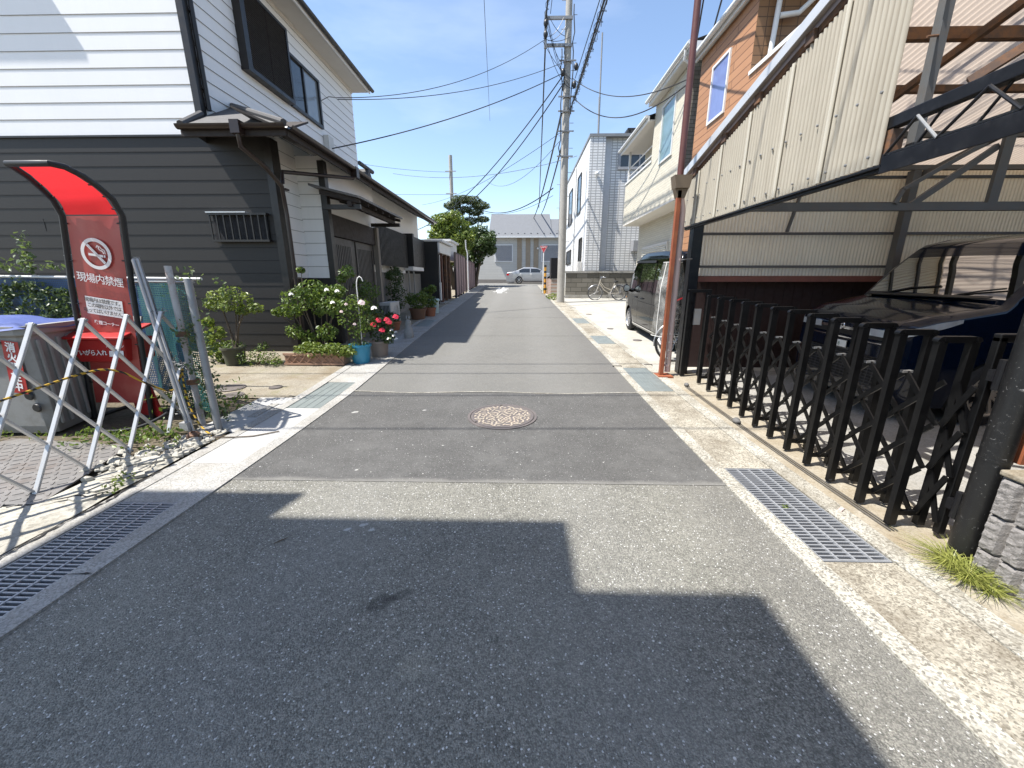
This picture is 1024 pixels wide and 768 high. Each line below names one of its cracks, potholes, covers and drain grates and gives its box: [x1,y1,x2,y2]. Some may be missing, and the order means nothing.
manhole cover [468,404,537,430]
drain grate [724,468,892,563]
drain grate [0,502,178,618]
